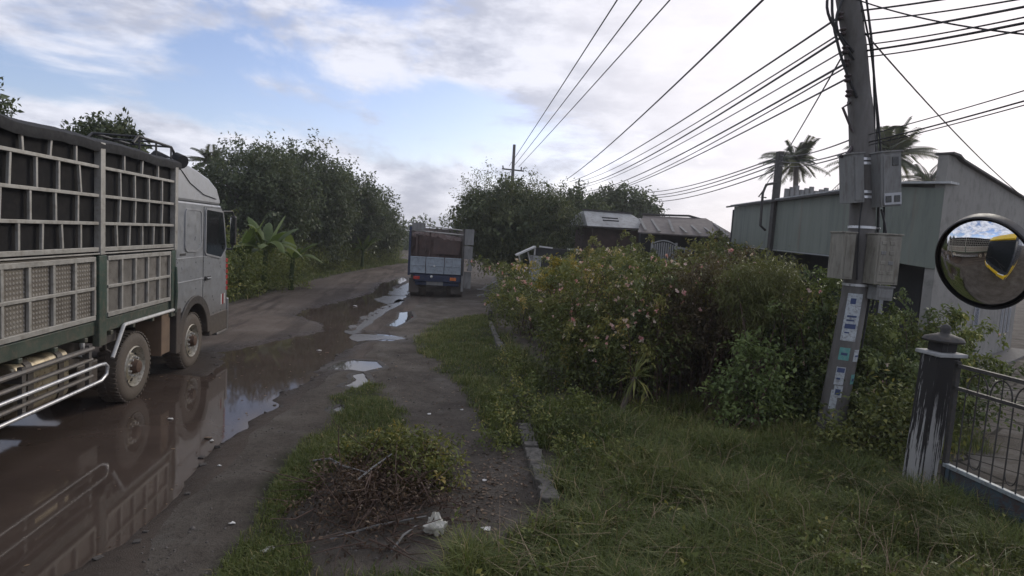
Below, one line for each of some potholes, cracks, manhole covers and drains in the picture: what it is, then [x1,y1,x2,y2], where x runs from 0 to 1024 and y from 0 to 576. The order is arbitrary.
pothole [384,311,418,327]
pothole [0,276,410,576]
